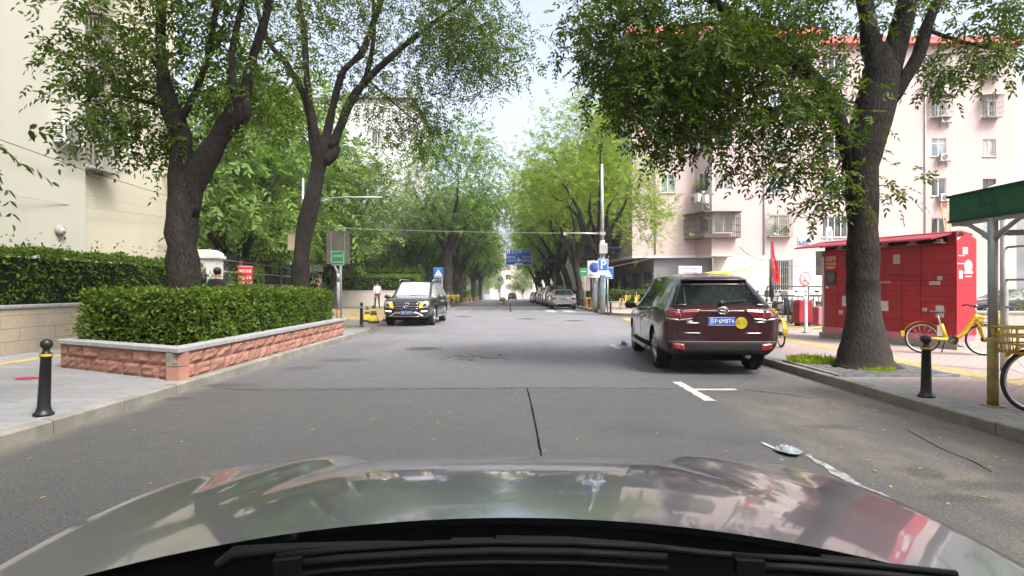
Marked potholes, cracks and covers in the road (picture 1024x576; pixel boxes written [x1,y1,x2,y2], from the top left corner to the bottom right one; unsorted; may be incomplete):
crack [527,389,542,456]
crack [908,430,991,472]
